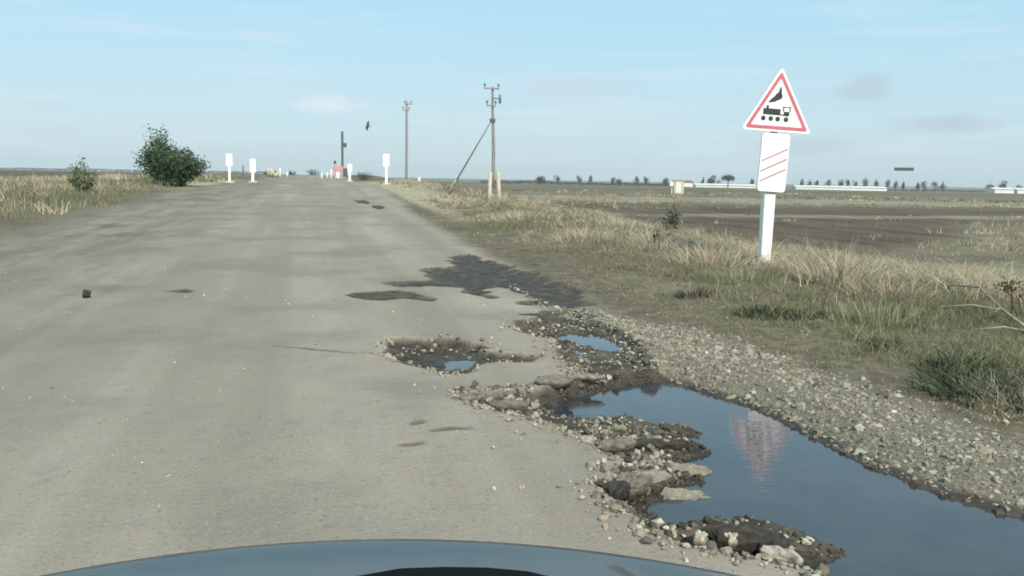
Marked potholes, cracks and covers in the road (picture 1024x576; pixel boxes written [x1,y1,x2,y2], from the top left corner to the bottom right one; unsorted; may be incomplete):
pothole [377,336,546,374]
pothole [457,316,1024,575]
